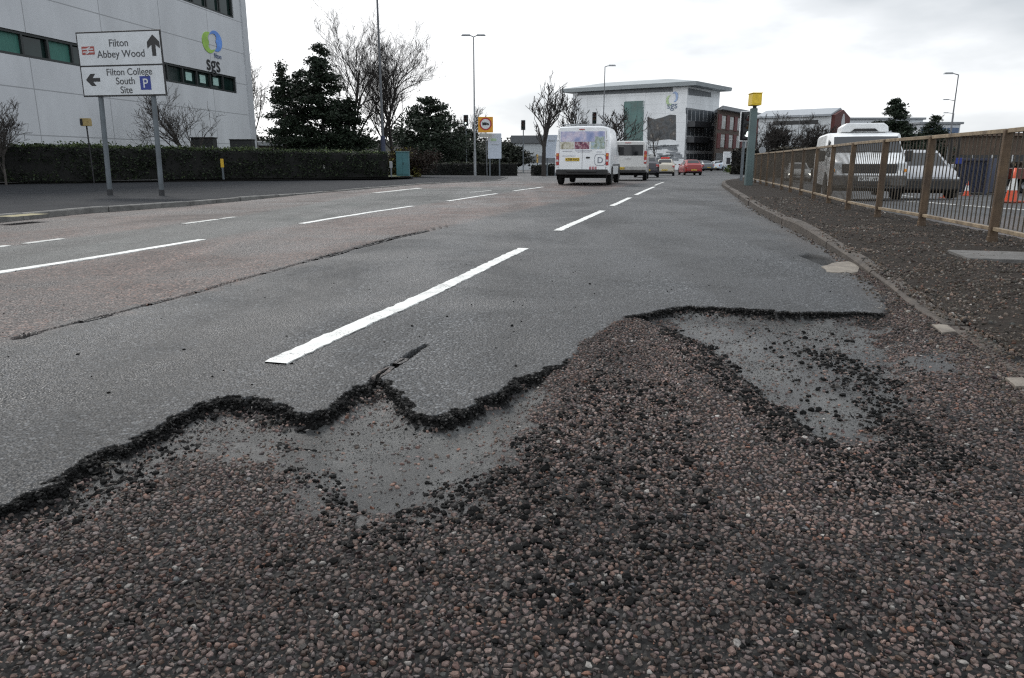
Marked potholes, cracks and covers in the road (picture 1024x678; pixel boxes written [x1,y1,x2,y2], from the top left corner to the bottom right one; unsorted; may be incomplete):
crack [371,358,409,386]
pothole [636,309,927,451]
pothole [0,360,564,540]
